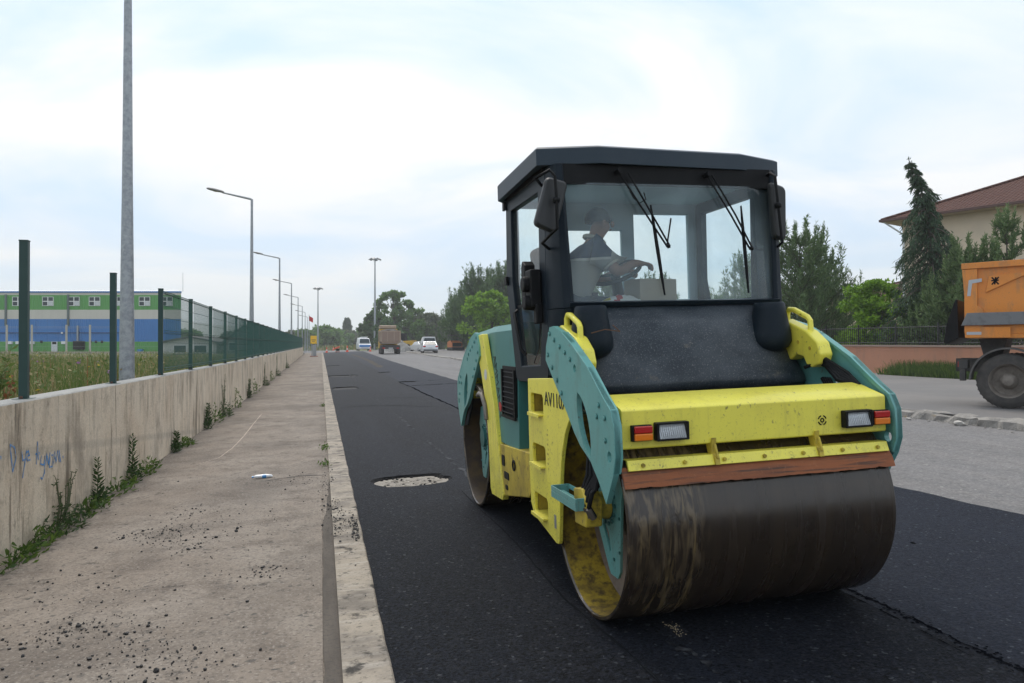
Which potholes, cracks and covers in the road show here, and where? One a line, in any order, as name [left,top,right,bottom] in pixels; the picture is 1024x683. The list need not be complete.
pothole [370,473,452,487]
